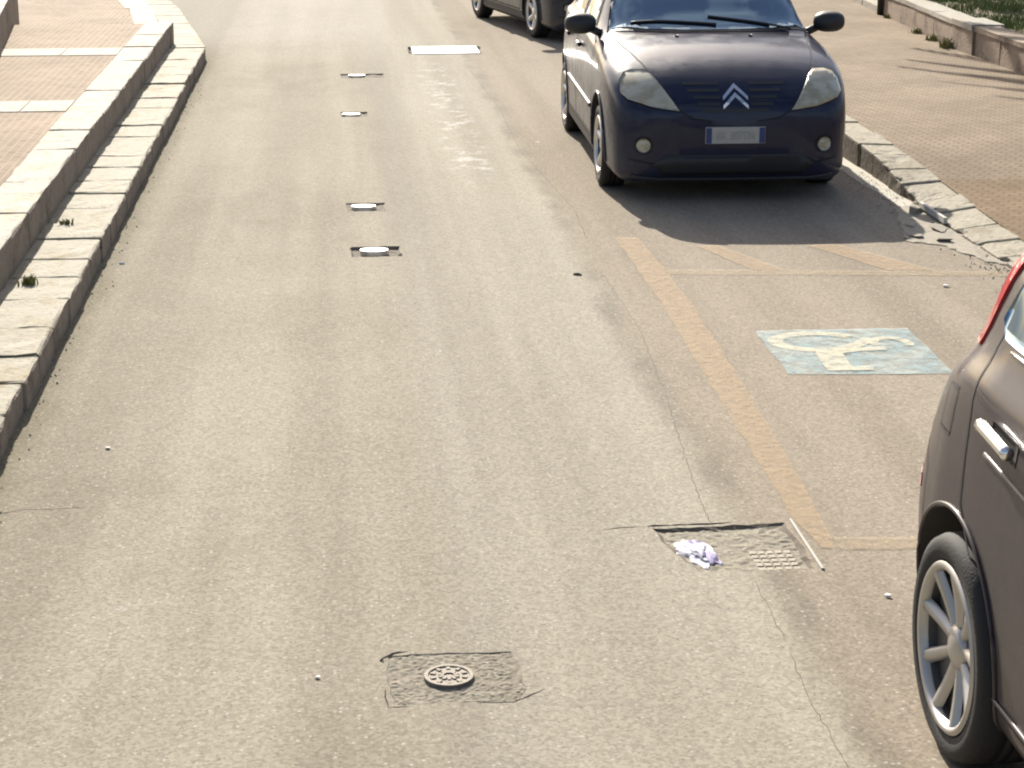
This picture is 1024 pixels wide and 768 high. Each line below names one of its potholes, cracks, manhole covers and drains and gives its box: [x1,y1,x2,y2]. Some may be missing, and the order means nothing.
crack [755,582,849,768]
